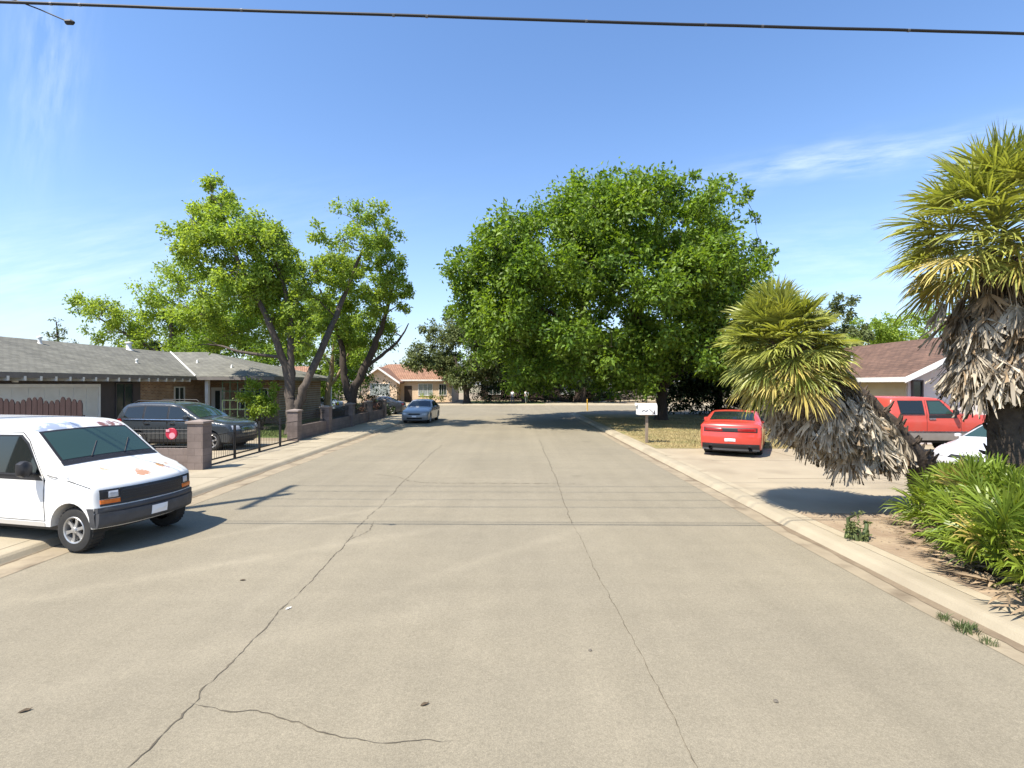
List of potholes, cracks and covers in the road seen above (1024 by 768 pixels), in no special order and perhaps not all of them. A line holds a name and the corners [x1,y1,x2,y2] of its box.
crack [127,445,456,768]
